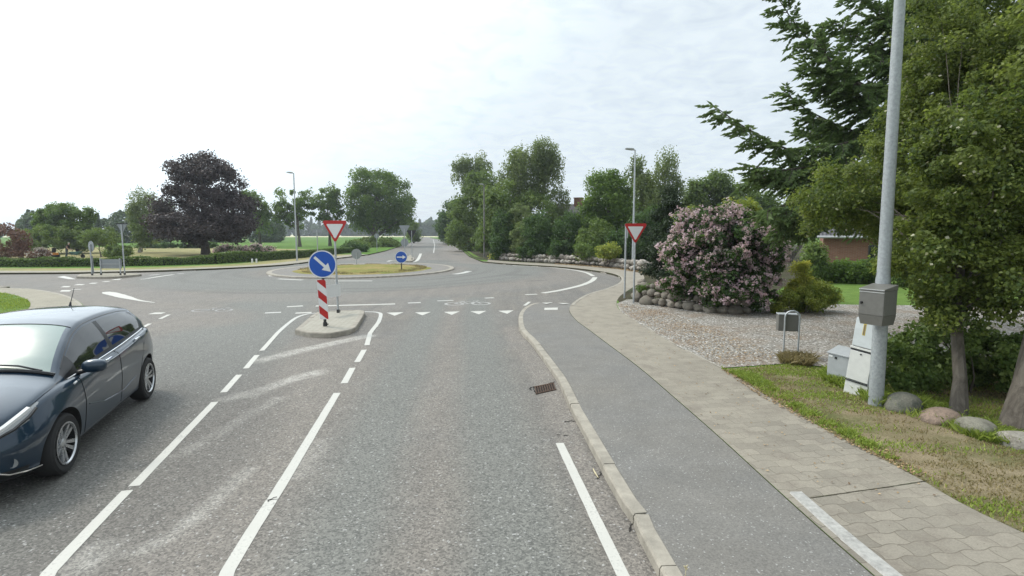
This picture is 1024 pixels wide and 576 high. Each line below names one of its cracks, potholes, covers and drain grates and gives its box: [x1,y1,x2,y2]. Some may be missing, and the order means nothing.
drain grate [534,382,556,394]
